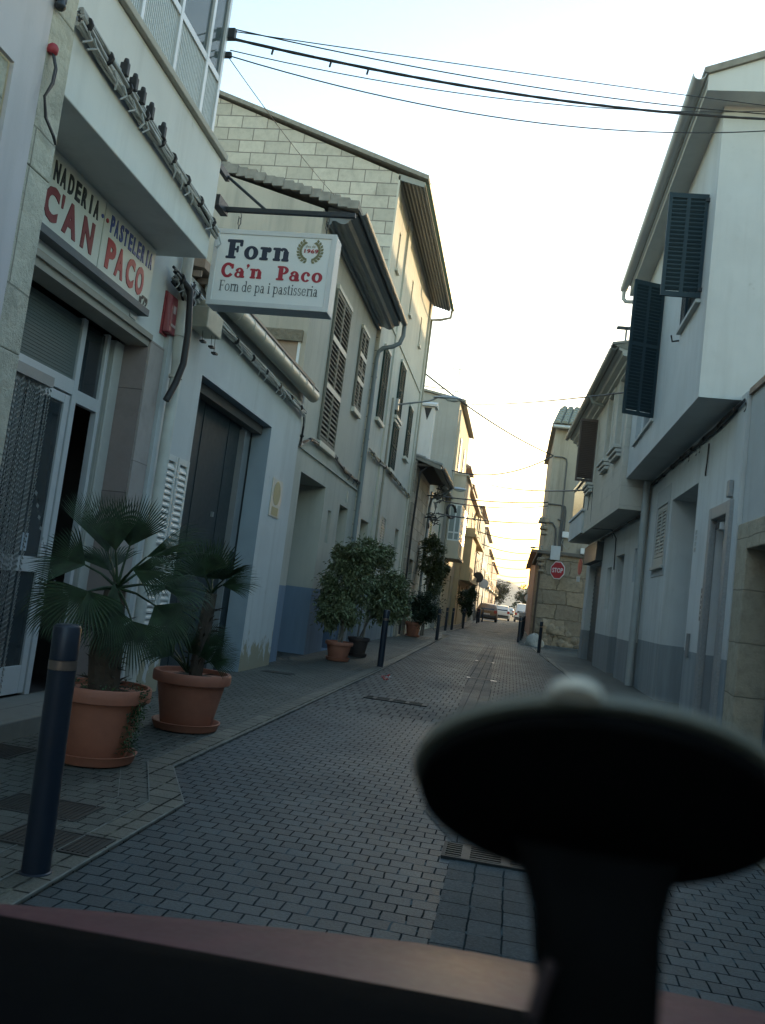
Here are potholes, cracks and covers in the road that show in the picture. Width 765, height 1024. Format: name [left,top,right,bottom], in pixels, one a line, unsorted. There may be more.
drain grate [363,695,428,707]
drain grate [440,841,522,872]
